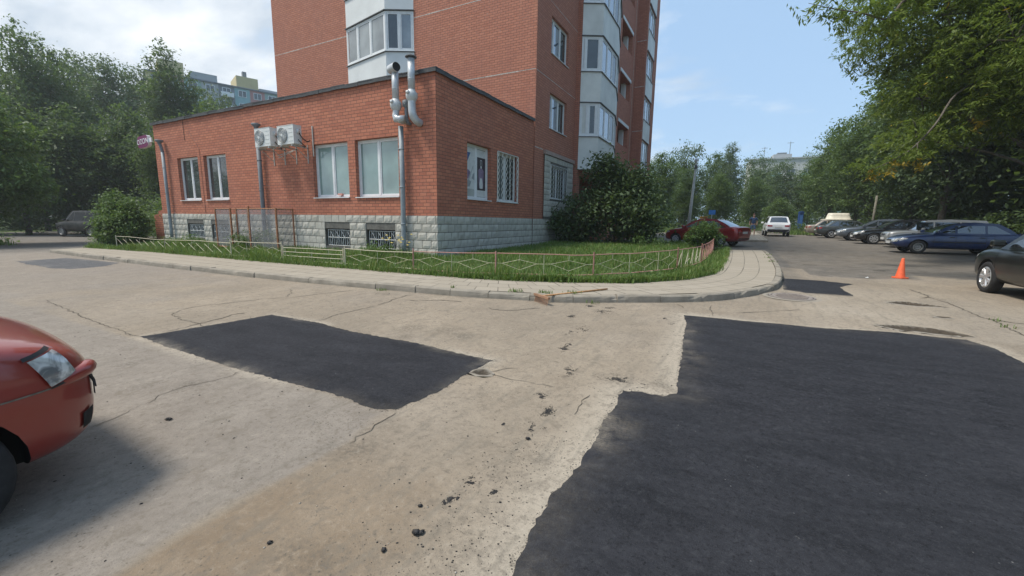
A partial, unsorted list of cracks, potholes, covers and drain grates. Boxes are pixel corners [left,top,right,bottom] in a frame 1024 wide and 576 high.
crack [98,371,240,425]
pothole [469,368,495,377]
crack [166,289,342,332]
manhole cover [762,293,822,302]
